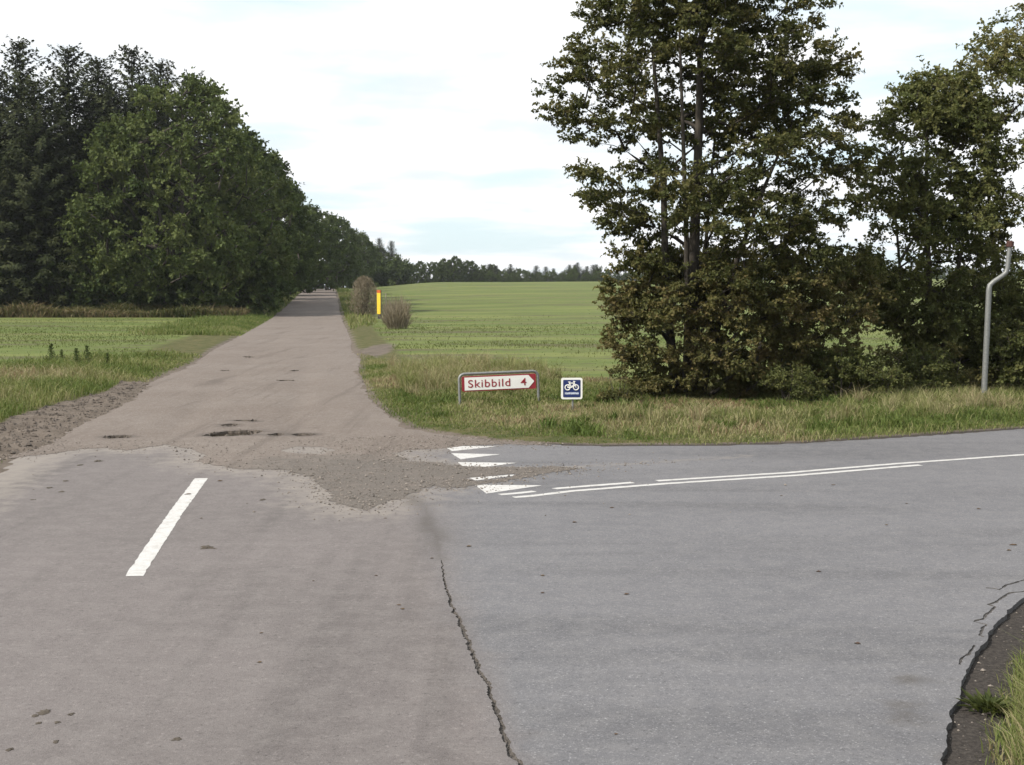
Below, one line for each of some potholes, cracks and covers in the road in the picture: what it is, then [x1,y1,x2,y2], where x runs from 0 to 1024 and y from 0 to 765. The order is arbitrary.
crack [441,560,523,765]
crack [959,580,1024,665]
pothole [202,429,263,437]
